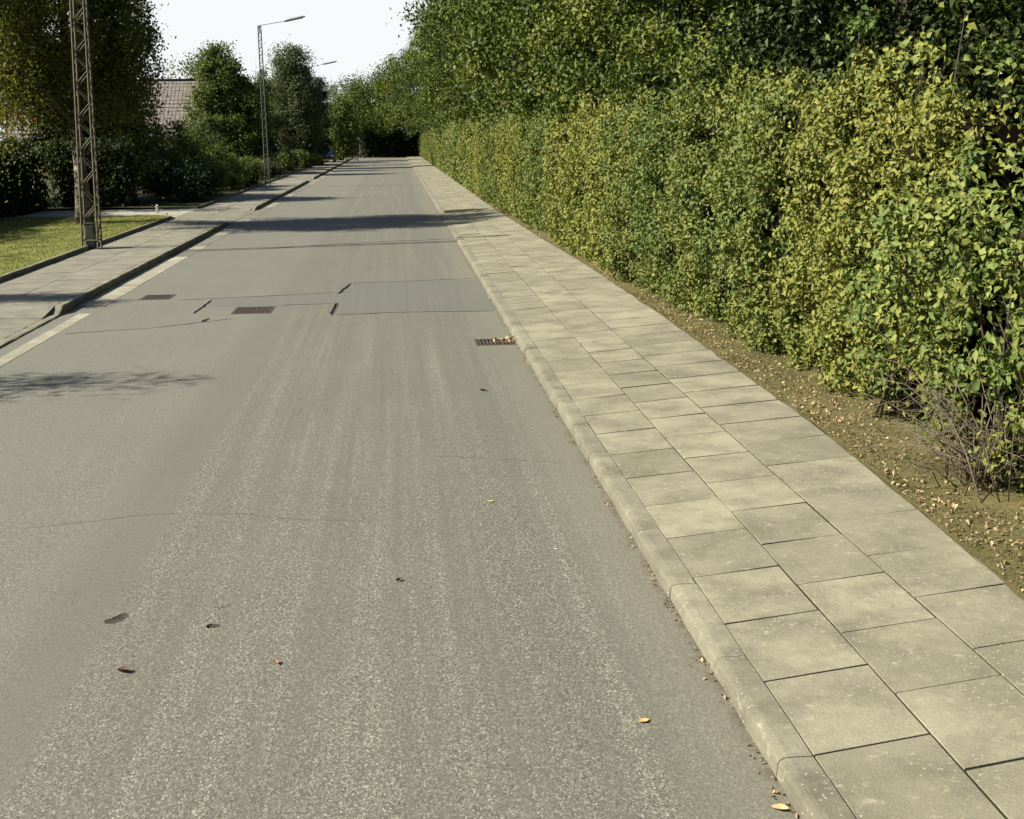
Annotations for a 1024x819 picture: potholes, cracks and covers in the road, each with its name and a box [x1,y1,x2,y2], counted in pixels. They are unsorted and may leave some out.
manhole cover [231,306,276,314]
drain grate [474,338,516,346]
